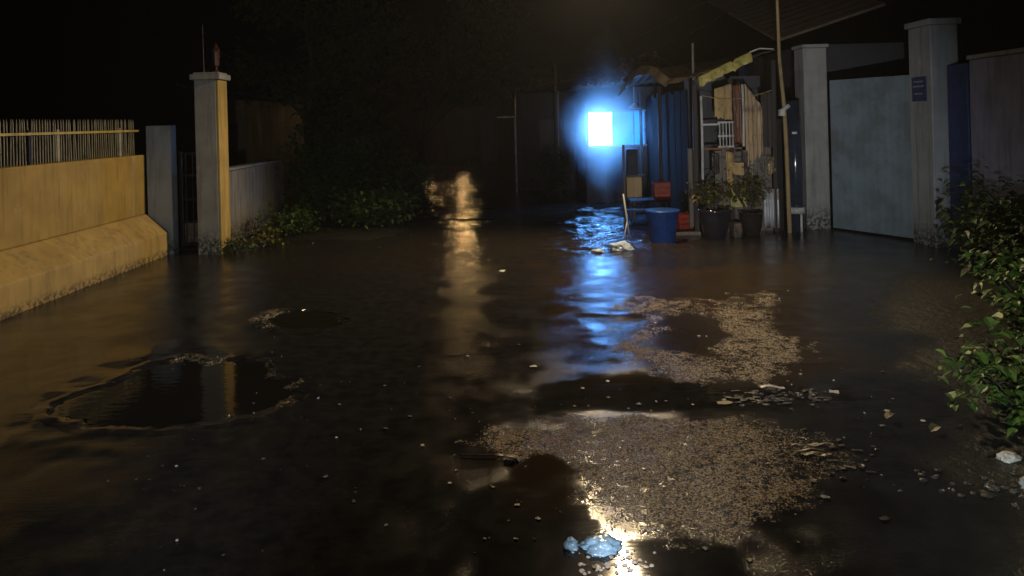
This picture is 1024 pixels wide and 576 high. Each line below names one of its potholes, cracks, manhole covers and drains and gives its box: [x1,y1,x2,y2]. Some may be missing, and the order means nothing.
pothole [246,306,360,334]
pothole [32,352,318,437]
